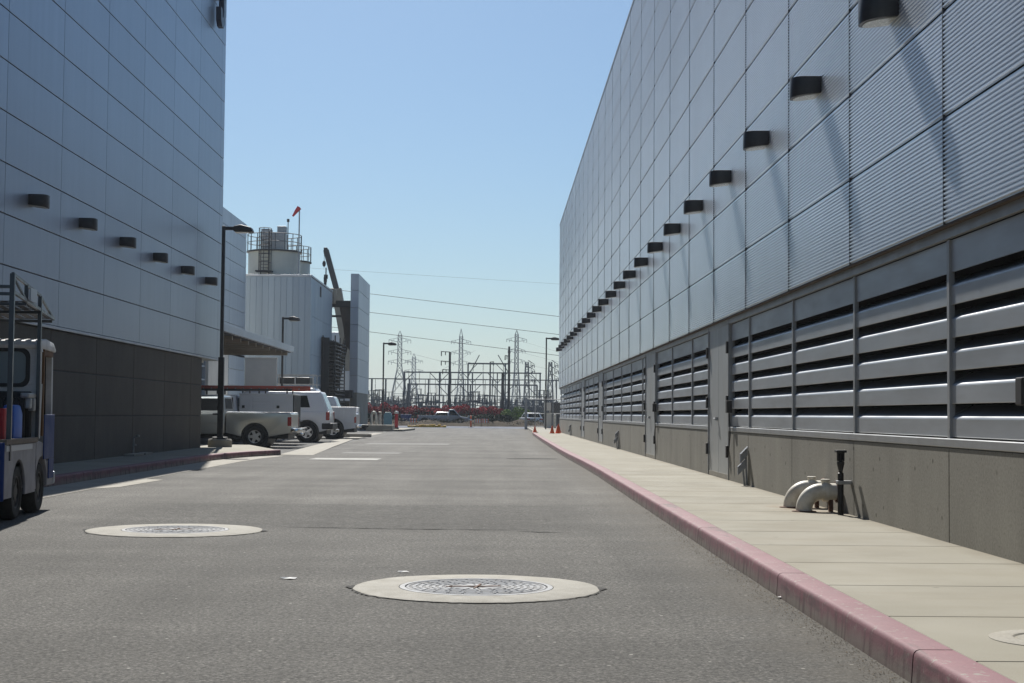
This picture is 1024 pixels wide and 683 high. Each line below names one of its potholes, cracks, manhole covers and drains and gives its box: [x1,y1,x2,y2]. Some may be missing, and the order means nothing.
manhole cover [989,630,1024,646]
manhole cover [353,575,599,604]
manhole cover [85,524,262,538]
